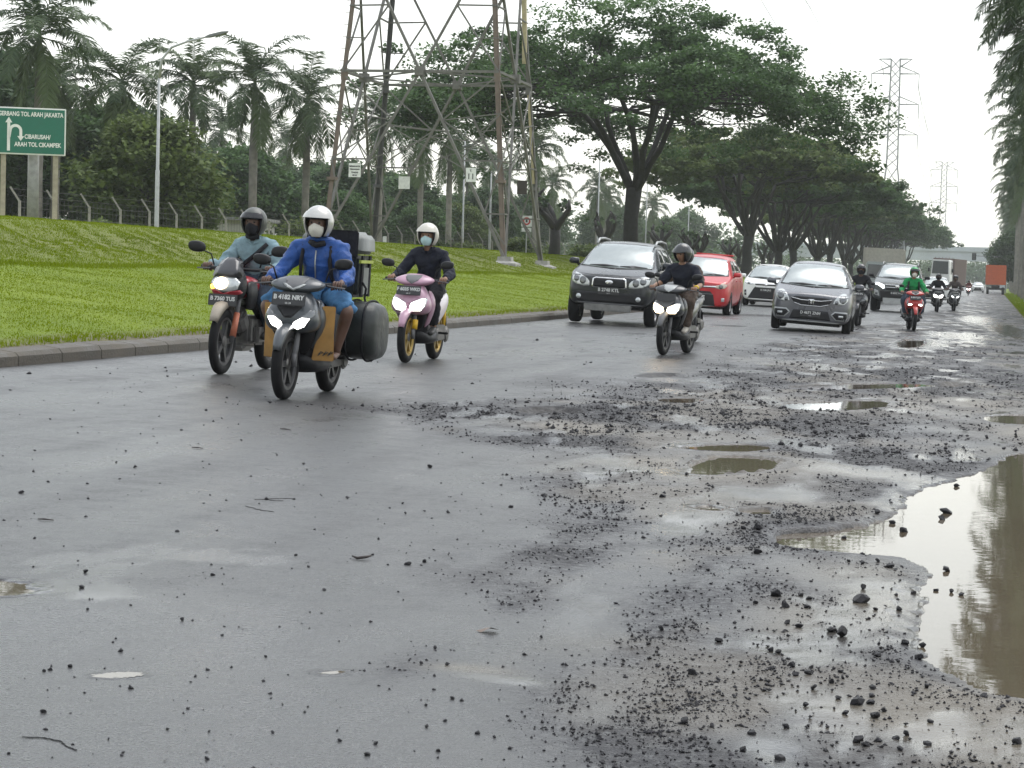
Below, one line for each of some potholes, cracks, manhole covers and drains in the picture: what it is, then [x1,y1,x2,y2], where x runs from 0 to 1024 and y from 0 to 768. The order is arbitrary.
pothole [657,442,784,453]
pothole [0,576,55,598]
pothole [884,339,939,349]
pothole [670,453,800,476]
pothole [771,381,936,390]
pothole [767,398,902,411]
pothole [750,450,1024,701]
pothole [970,412,1024,424]
